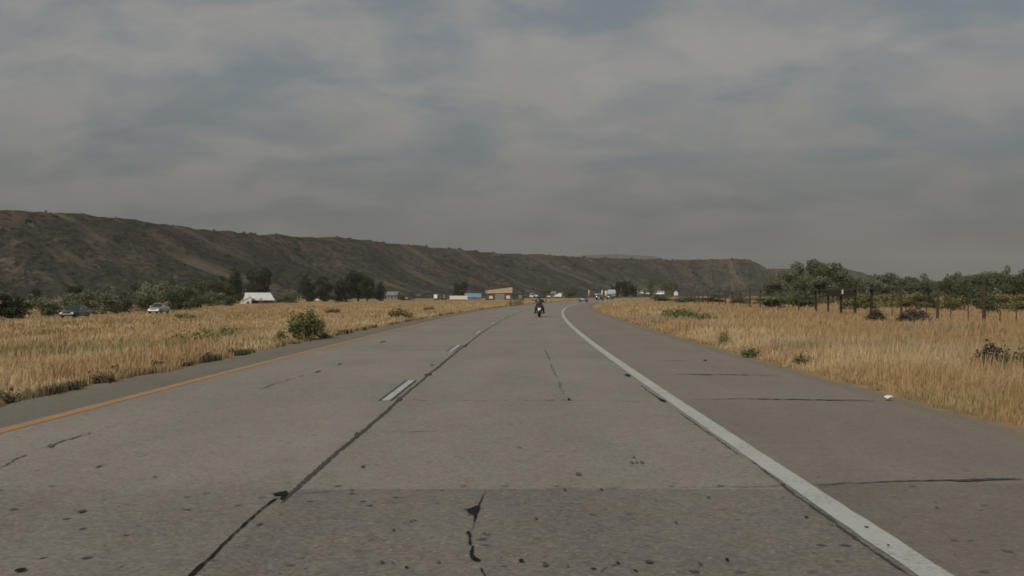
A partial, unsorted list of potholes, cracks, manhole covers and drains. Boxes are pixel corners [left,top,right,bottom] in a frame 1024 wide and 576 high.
crack [0,424,116,467]
crack [468,491,487,576]
